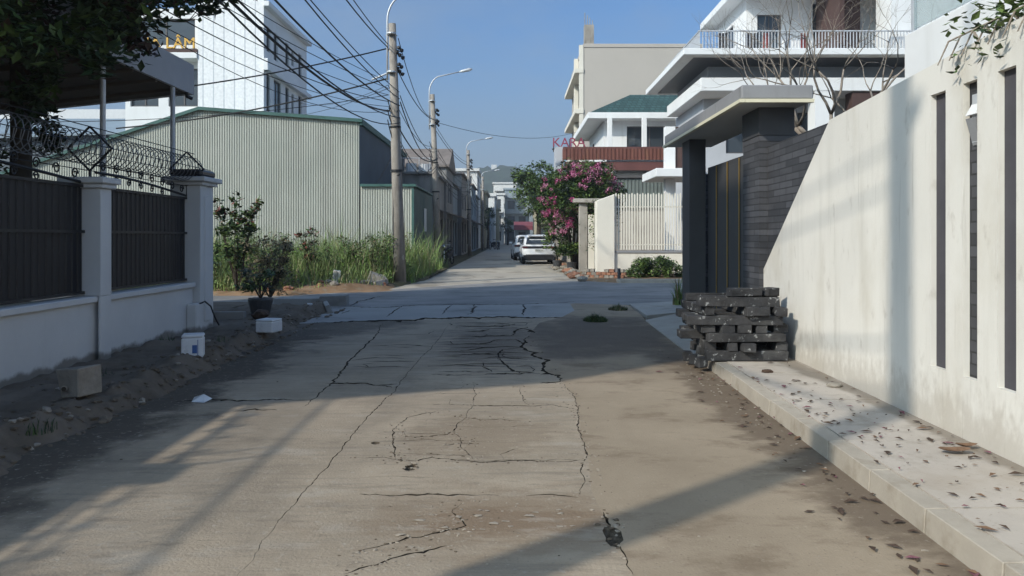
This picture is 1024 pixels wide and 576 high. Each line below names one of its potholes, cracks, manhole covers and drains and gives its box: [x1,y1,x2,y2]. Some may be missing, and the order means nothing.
crack [176,296,588,573]
pothole [603,527,623,547]
